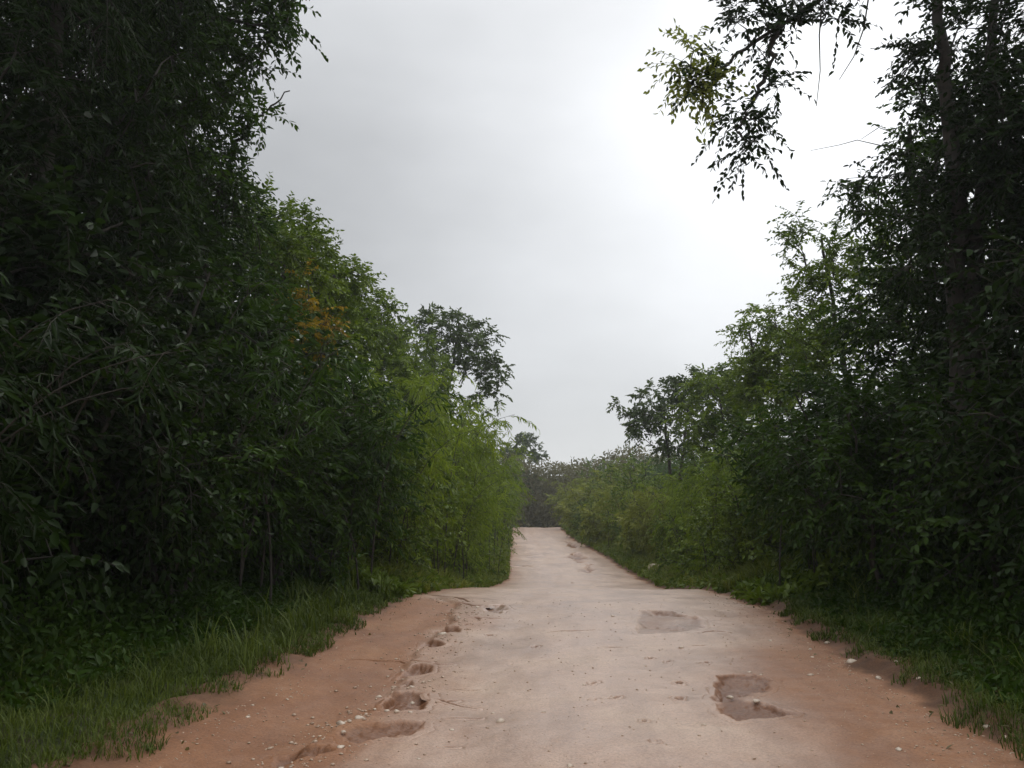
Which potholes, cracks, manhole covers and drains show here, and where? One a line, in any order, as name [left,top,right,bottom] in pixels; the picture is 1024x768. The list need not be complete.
pothole [477,604,515,614]
pothole [427,625,466,636]
pothole [701,672,805,724]
pothole [414,638,454,650]
pothole [625,609,710,636]
pothole [554,551,598,564]
pothole [391,662,438,682]
pothole [373,689,441,713]
pothole [326,718,436,747]
pothole [569,563,605,574]
